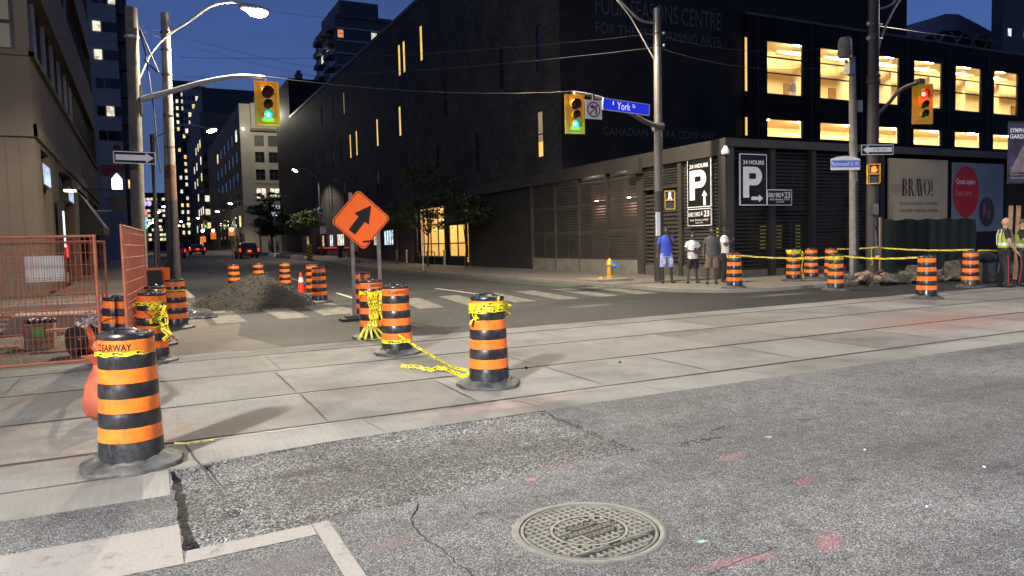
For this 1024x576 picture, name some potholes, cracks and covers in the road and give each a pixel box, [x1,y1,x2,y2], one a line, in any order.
manhole cover [512,502,668,564]
crack [410,504,475,576]
